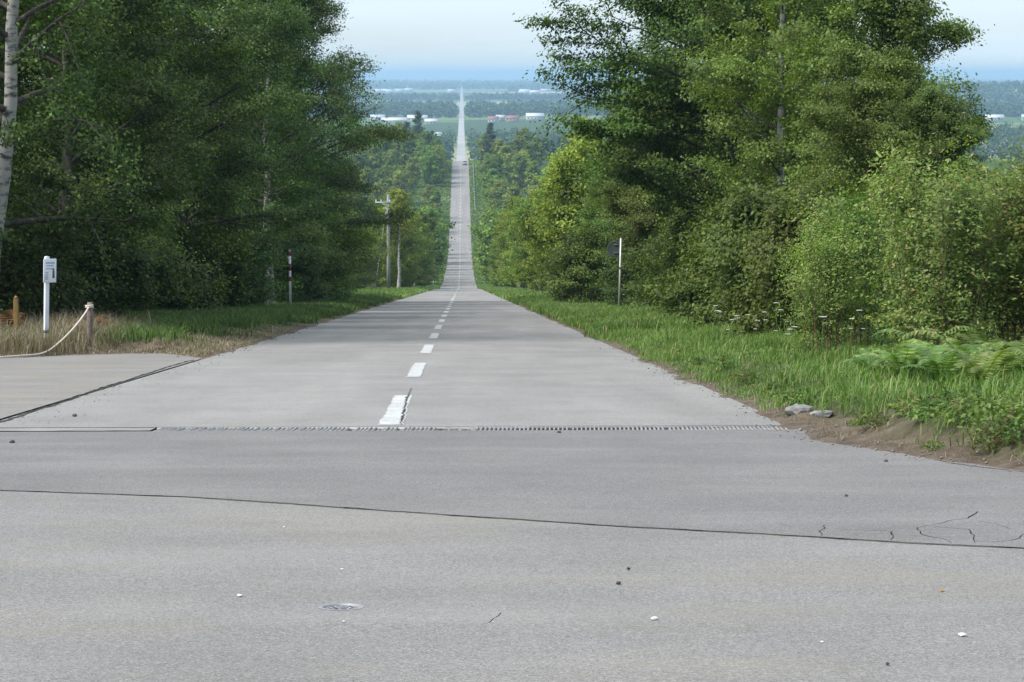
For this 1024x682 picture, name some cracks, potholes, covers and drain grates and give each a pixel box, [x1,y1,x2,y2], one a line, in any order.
manhole cover [319,603,364,611]
